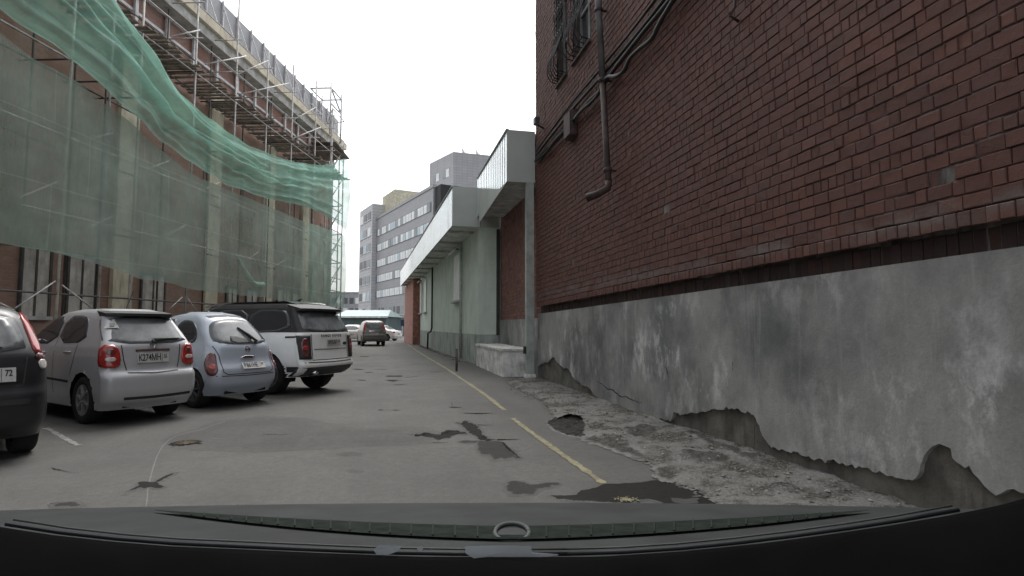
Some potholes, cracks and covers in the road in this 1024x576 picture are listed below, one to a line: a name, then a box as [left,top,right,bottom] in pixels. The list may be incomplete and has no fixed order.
pothole [545,416,586,438]
